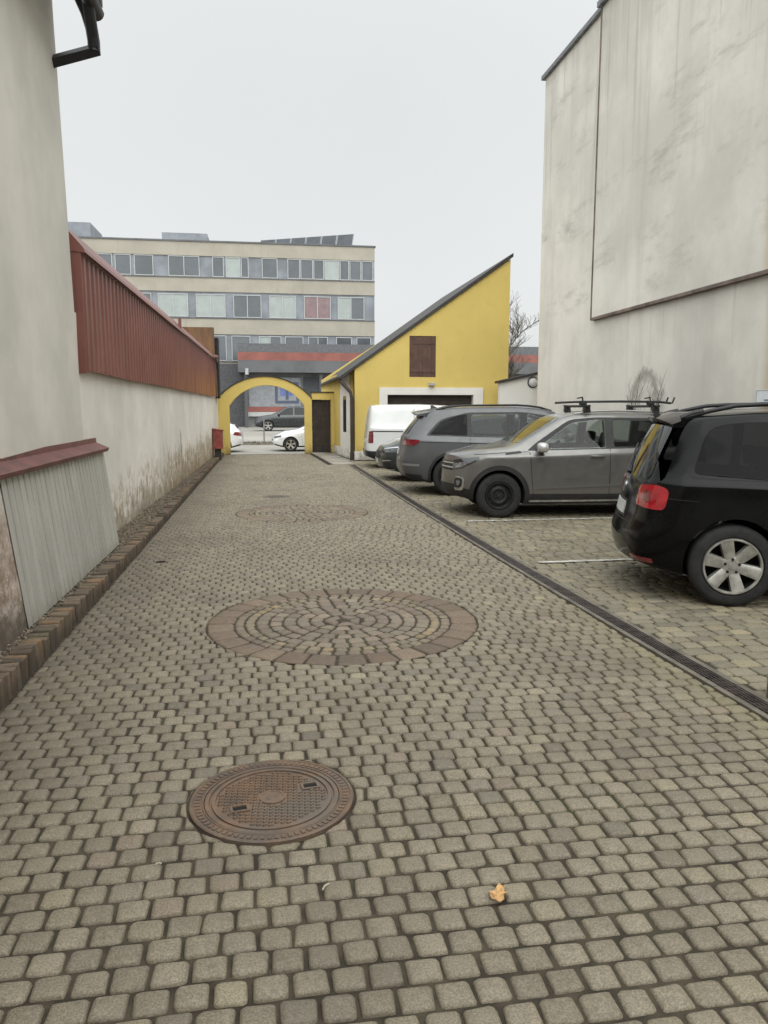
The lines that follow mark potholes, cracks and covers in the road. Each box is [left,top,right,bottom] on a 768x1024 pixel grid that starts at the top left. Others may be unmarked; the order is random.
manhole cover [189,760,353,847]
